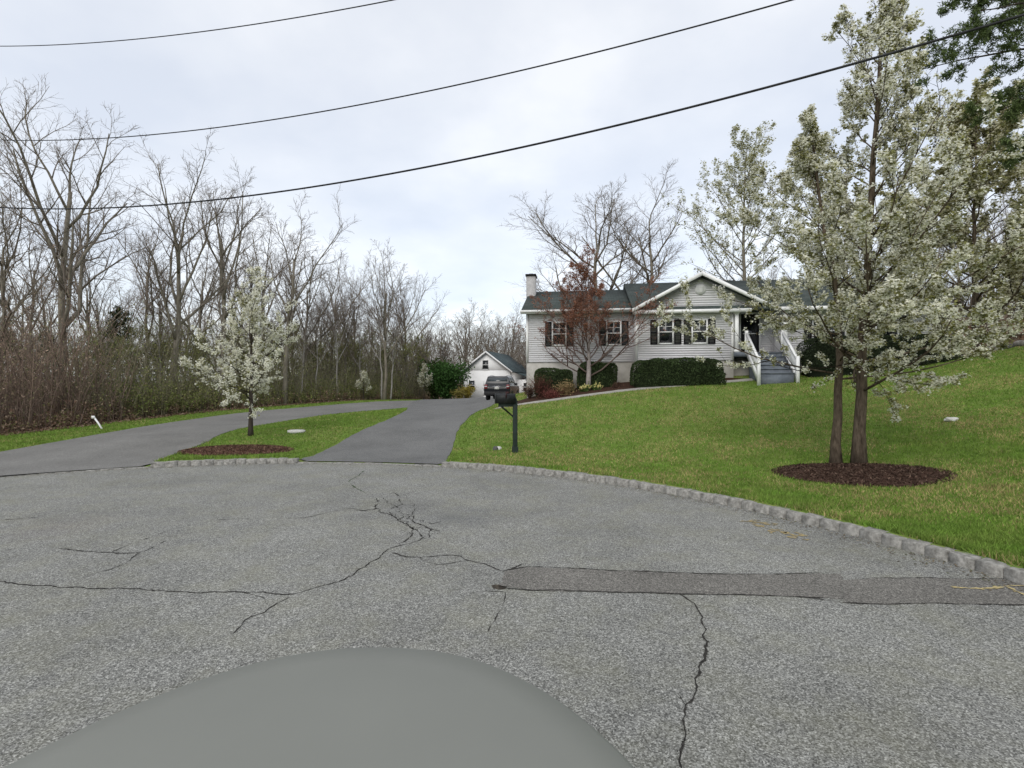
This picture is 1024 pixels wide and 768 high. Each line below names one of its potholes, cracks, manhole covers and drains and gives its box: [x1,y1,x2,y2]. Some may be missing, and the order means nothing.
crack [677,594,710,768]
crack [3,471,521,633]
